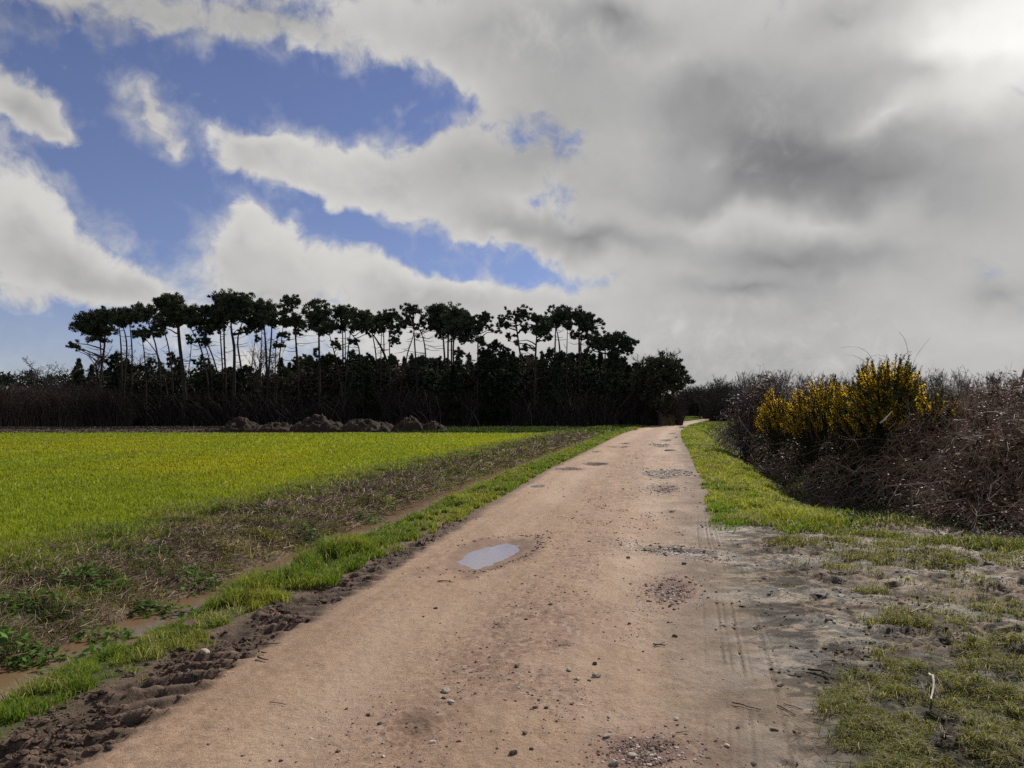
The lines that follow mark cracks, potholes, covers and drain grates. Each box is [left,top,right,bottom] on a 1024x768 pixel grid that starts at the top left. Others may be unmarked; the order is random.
pothole [640,469,695,479]
pothole [427,534,546,577]
pothole [638,483,687,496]
pothole [610,538,753,562]
pothole [621,572,718,619]
